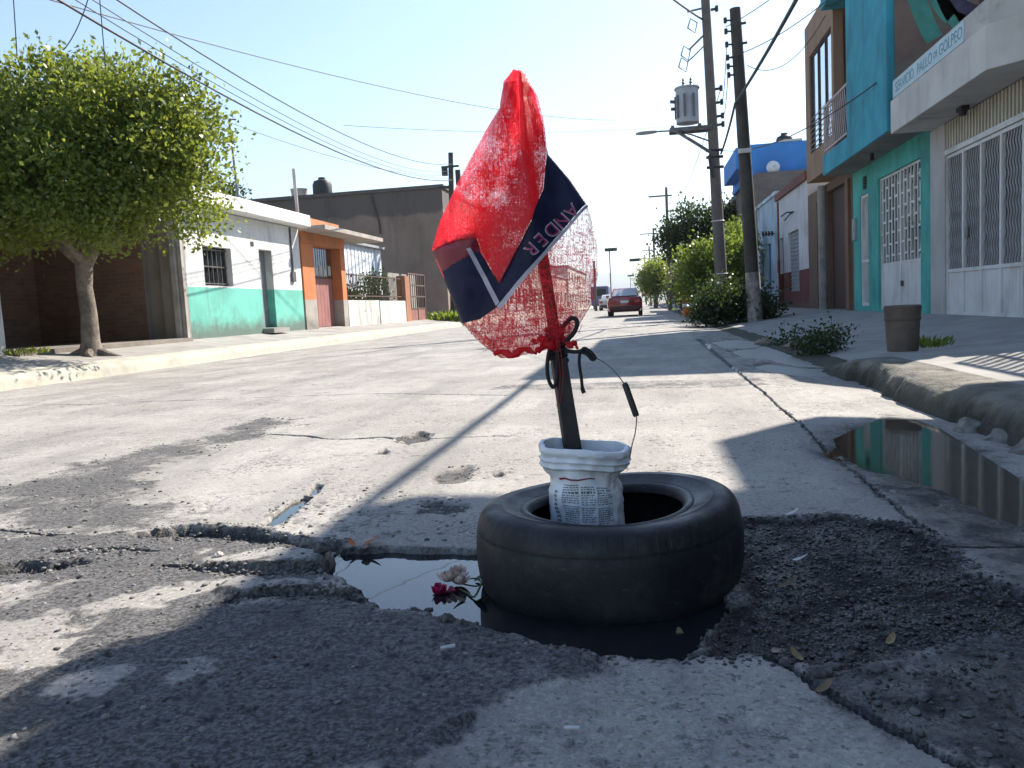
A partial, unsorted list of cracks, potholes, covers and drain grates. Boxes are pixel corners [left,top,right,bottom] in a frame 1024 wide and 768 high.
pothole [0,557,96,575]
pothole [698,513,1024,671]
crack [252,416,393,453]
pothole [262,496,314,526]
pothole [323,545,736,654]
pothole [127,523,347,564]
pothole [429,464,482,484]
pothole [410,500,473,515]
pothole [392,431,435,445]
